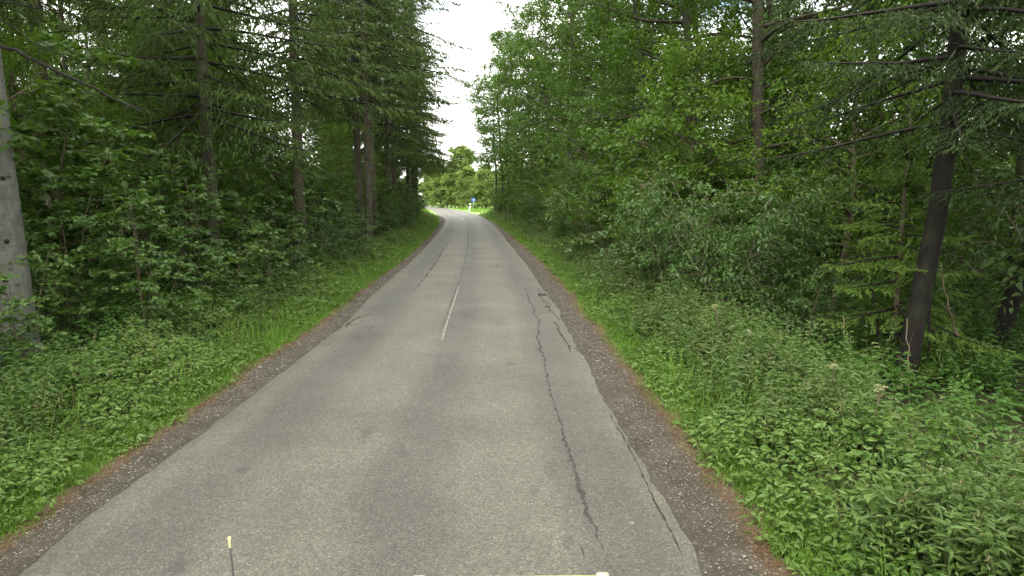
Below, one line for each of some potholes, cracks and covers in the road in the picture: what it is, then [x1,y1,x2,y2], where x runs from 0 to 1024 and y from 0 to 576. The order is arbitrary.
crack [518,288,687,566]
